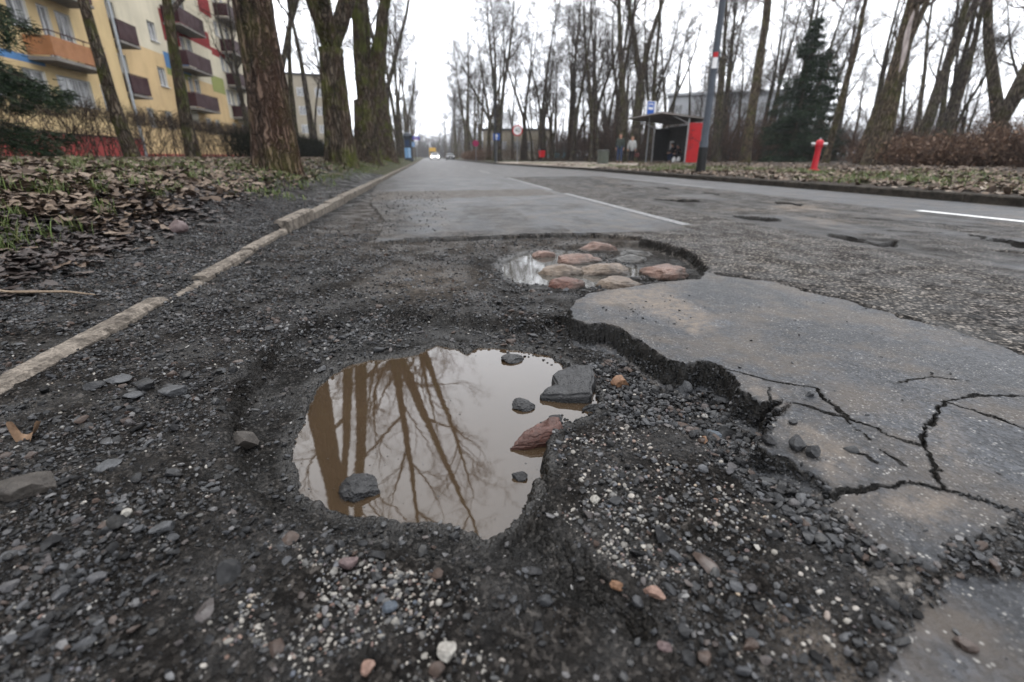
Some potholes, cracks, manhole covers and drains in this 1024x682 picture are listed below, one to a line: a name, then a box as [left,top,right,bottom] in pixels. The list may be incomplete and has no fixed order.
crack [724,368,1024,514]
pothole [496,238,708,298]
pothole [216,306,949,653]
pothole [986,238,1024,248]
pothole [826,233,900,247]
